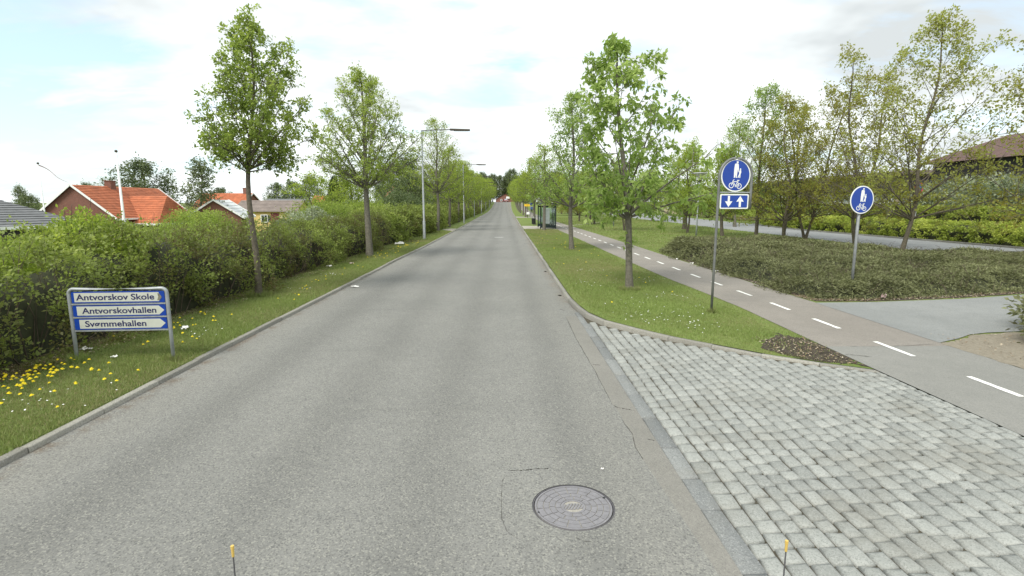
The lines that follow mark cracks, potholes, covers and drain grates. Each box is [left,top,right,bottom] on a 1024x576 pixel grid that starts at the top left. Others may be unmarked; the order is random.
crack [501,468,592,542]
manhole cover [532,485,615,531]
